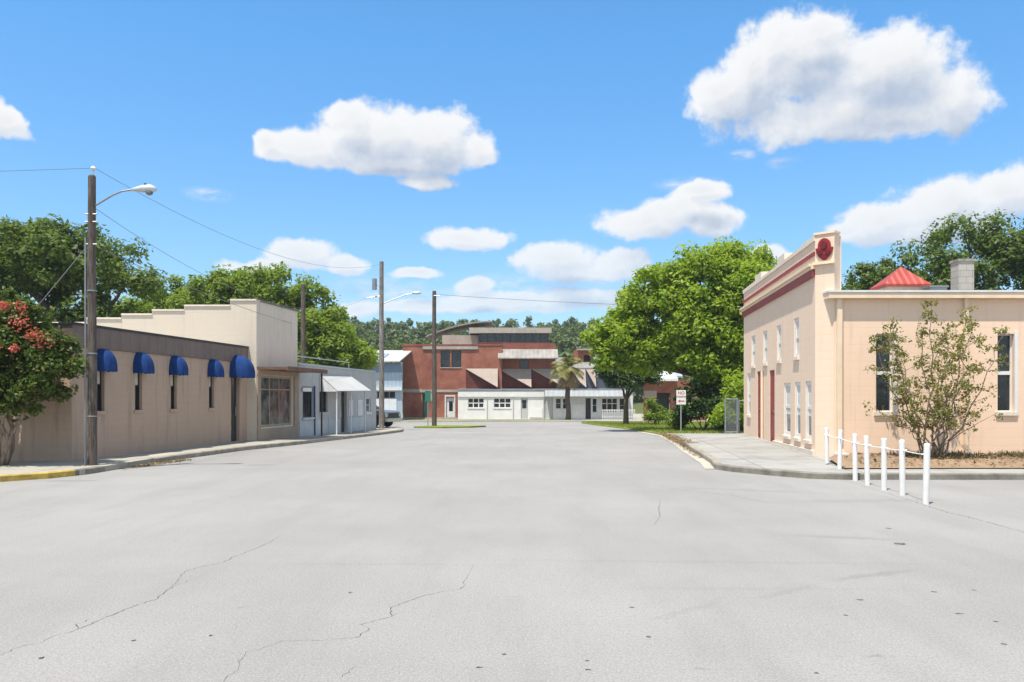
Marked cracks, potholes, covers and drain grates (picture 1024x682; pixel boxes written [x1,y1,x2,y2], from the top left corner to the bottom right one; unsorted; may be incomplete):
crack [224,568,472,681]
crack [0,537,278,656]
